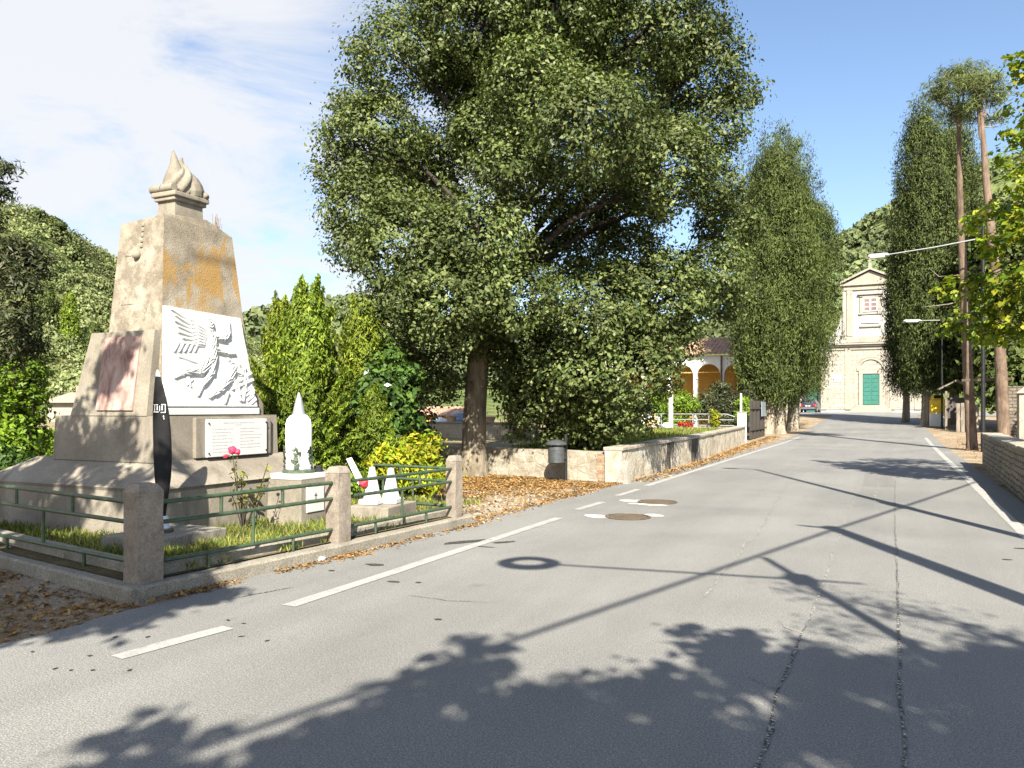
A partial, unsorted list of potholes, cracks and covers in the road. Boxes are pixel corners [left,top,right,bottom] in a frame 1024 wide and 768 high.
crack [702,461,797,599]
crack [740,467,865,768]
